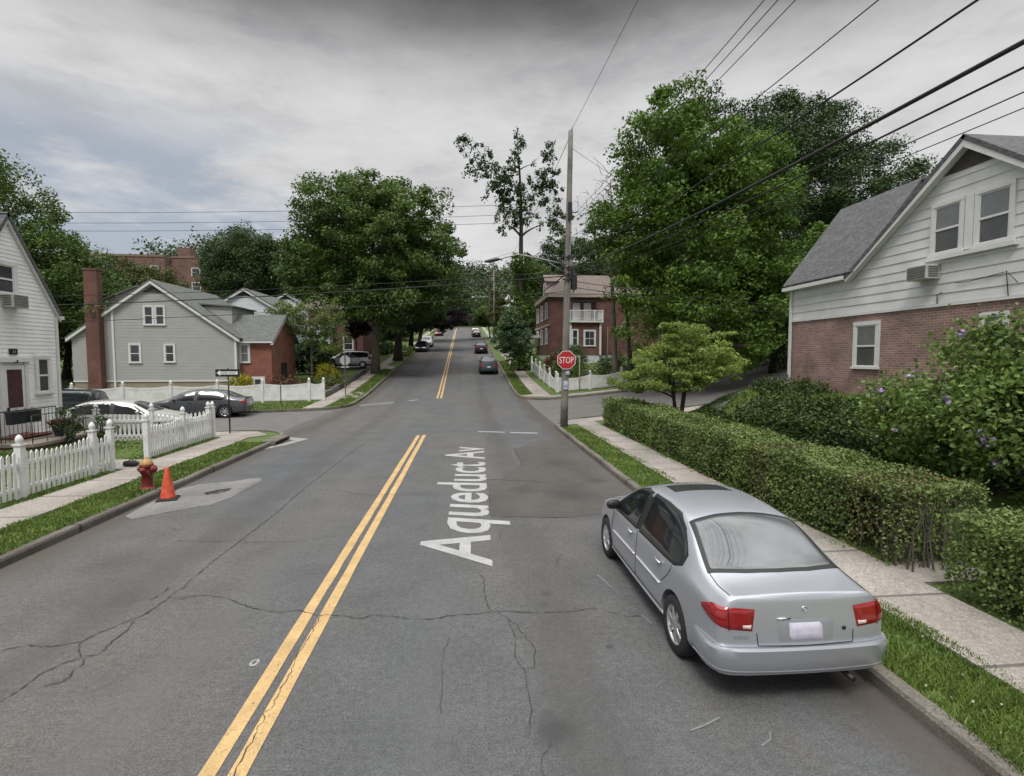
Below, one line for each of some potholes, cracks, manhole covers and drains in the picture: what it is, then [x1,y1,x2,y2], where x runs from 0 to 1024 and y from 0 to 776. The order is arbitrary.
crack [1,444,641,776]
